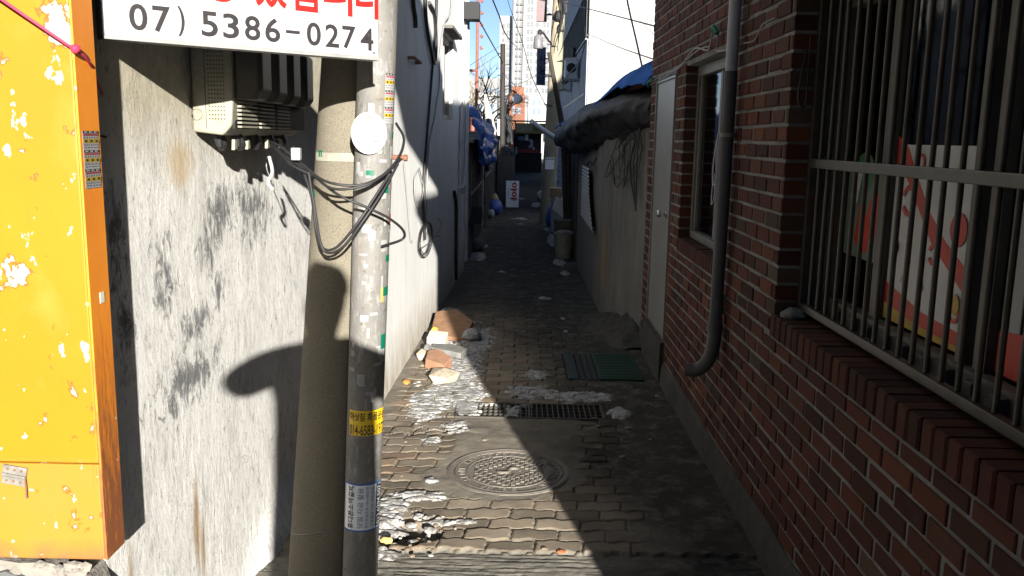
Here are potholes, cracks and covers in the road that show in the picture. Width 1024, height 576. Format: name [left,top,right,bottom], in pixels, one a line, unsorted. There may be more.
manhole cover [447,449,570,496]
drain grate [454,402,606,423]
